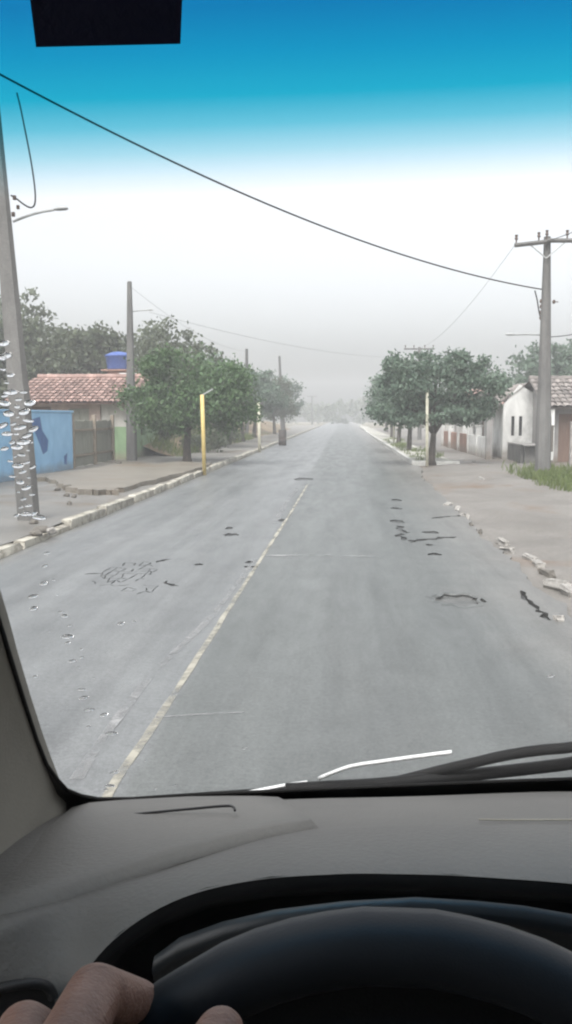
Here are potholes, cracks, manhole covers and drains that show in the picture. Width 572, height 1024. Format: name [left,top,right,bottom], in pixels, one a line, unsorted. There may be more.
crack [395,526,455,542]
crack [520,591,548,620]
crack [89,559,177,594]
pothole [424,591,486,608]
